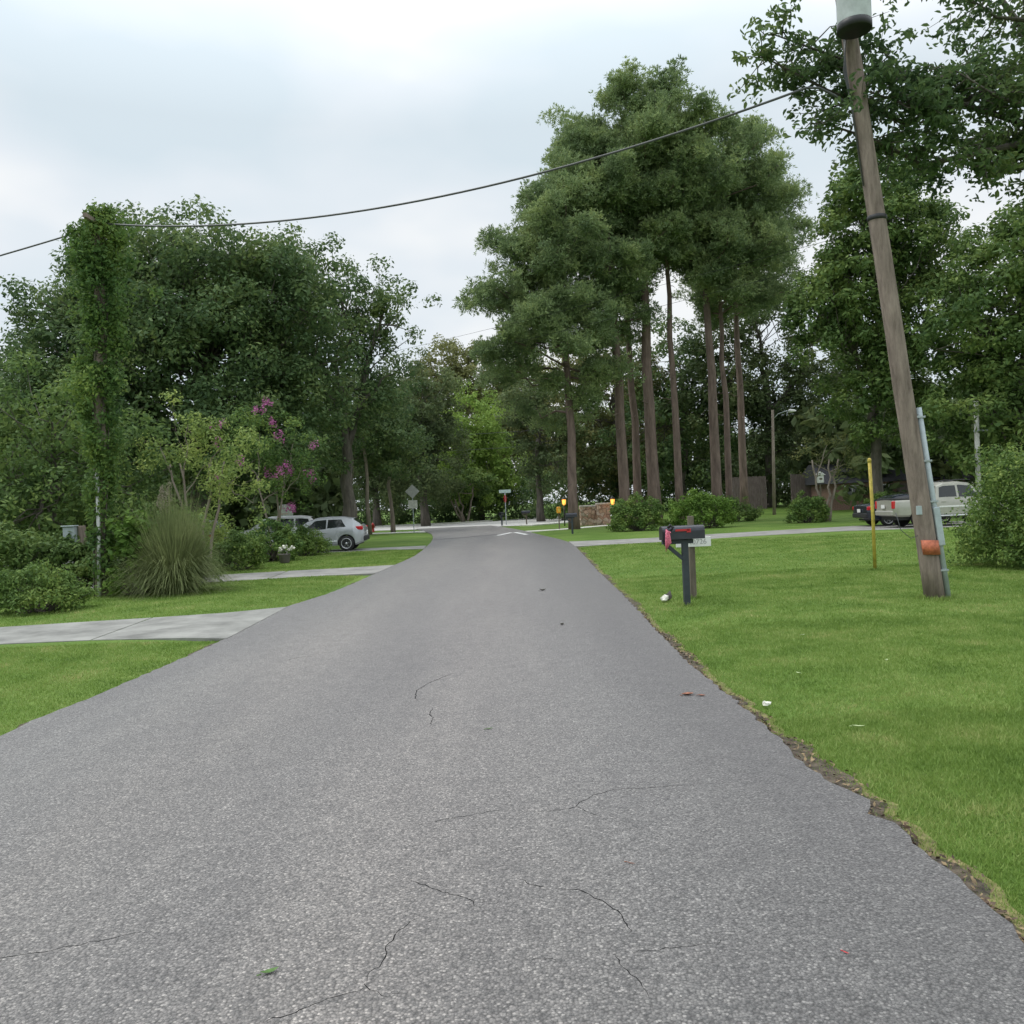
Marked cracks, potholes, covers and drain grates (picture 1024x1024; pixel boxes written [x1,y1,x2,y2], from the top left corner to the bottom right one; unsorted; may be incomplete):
crack [522,879,721,996]
crack [408,878,474,905]
crack [2,931,154,958]
crack [262,917,420,1023]
crack [435,785,678,822]
